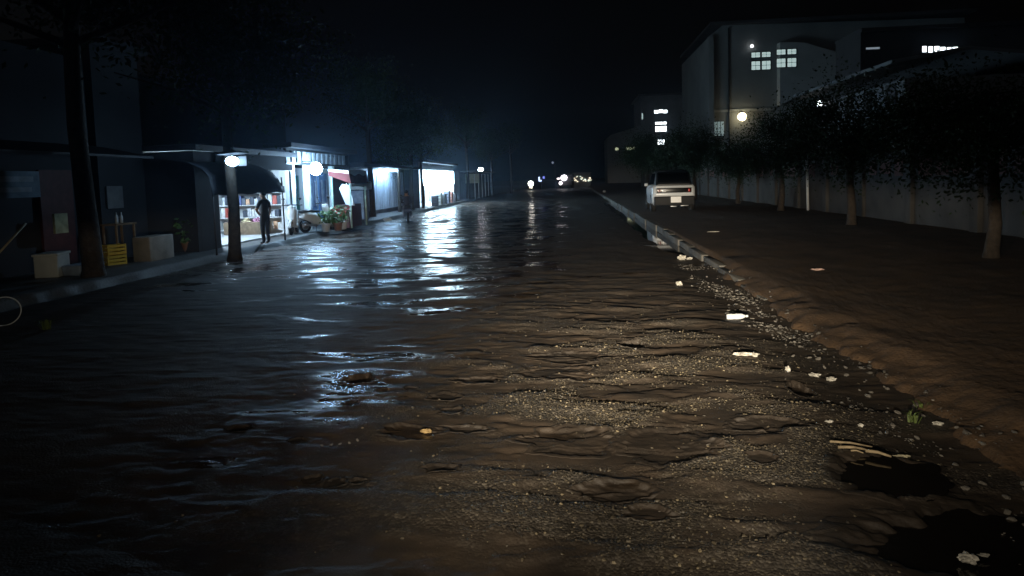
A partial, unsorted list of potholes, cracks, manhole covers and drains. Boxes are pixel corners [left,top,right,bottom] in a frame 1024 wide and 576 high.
pothole [800,494,1024,576]
pothole [817,449,966,510]
